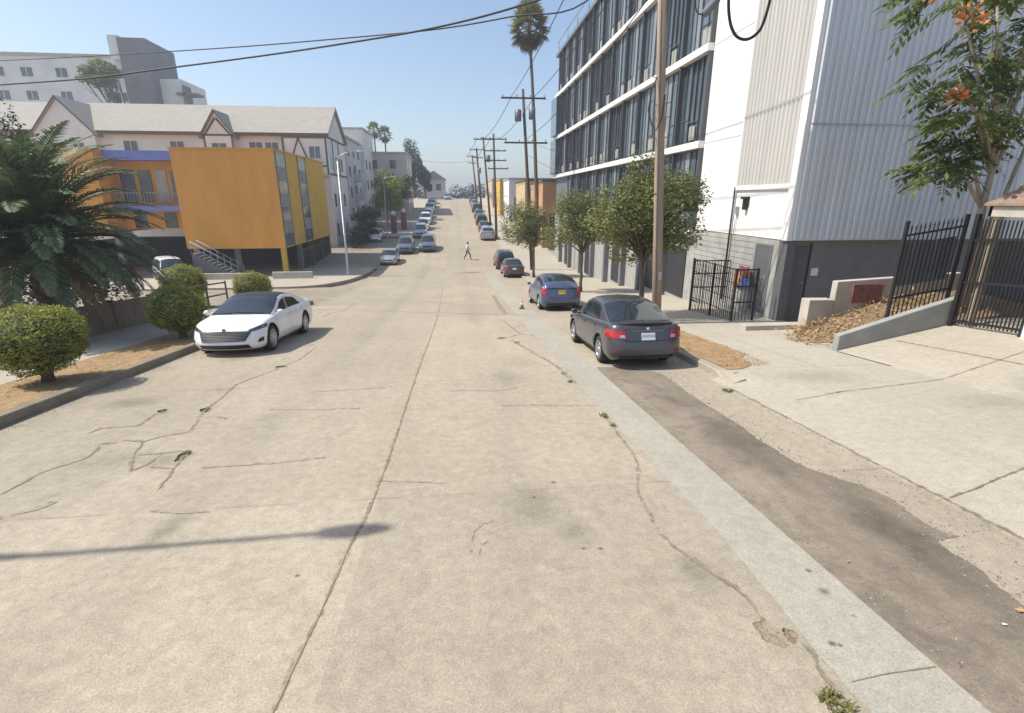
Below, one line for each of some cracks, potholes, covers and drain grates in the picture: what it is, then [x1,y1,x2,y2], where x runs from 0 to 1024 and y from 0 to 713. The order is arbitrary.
crack [1,349,314,495]
pothole [782,628,798,644]
pothole [753,620,789,648]
crack [493,295,570,380]
crack [450,386,765,621]
